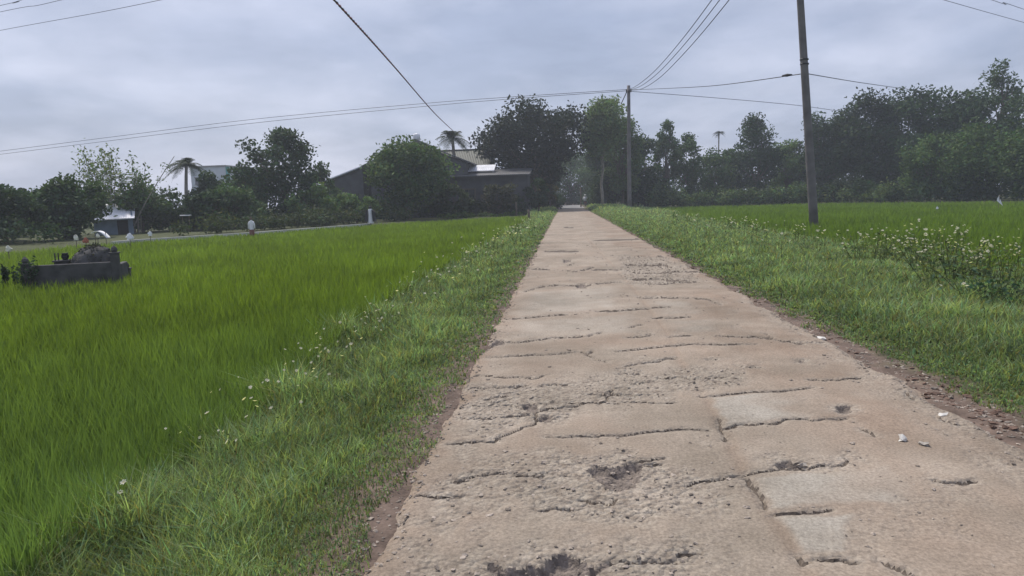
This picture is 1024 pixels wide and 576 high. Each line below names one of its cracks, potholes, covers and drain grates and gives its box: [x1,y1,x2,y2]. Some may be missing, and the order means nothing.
crack [687,460,849,517]
crack [414,472,544,500]
crack [632,459,664,467]
crack [881,562,912,576]
pothole [776,460,810,470]
pothole [486,553,610,576]
pothole [586,463,645,492]
crack [451,238,876,445]
crack [543,499,618,513]
crack [794,557,857,567]
crack [609,553,693,567]
